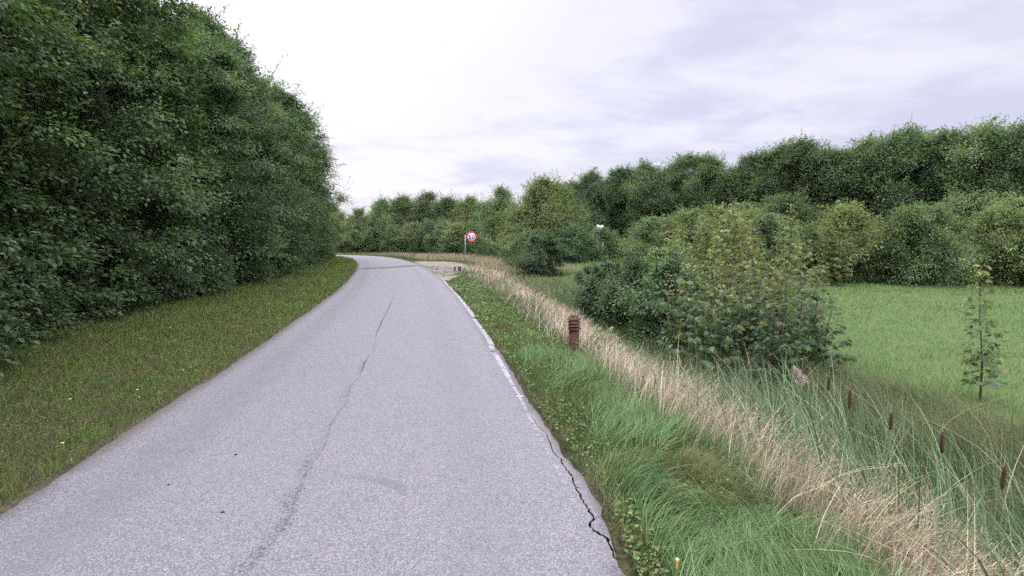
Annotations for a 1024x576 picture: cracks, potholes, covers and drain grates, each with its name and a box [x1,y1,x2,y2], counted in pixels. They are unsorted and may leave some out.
crack [534,420,616,559]
